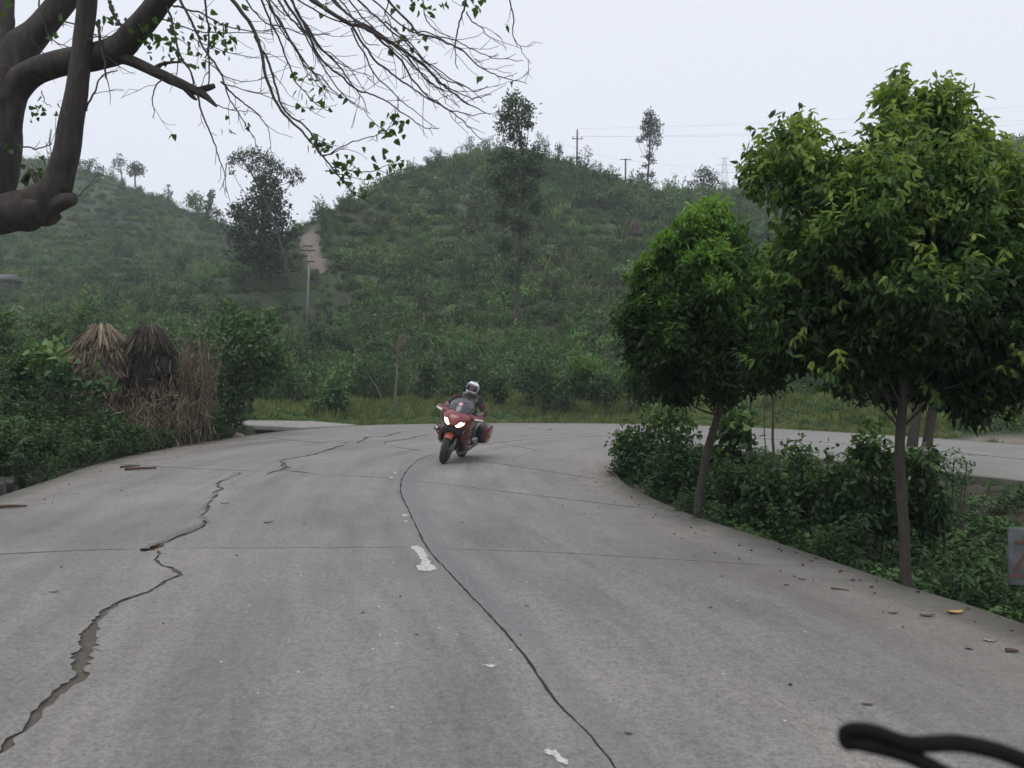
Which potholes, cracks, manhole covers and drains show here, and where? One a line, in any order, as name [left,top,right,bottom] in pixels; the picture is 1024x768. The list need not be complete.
crack [0,471,241,754]
crack [267,432,429,475]
